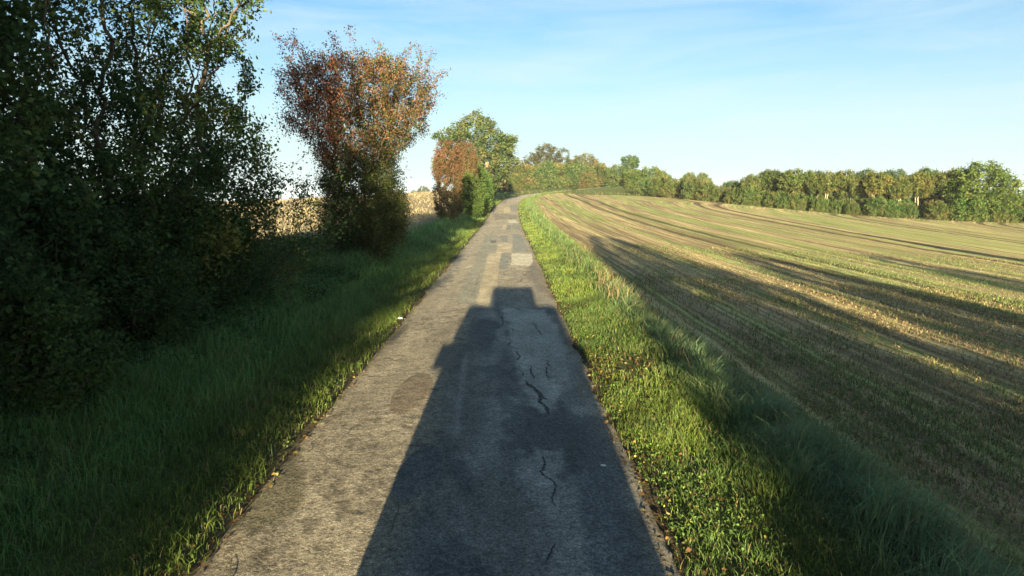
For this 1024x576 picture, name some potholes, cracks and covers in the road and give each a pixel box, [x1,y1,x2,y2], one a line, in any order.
crack [501,317,559,414]
crack [539,455,558,505]
